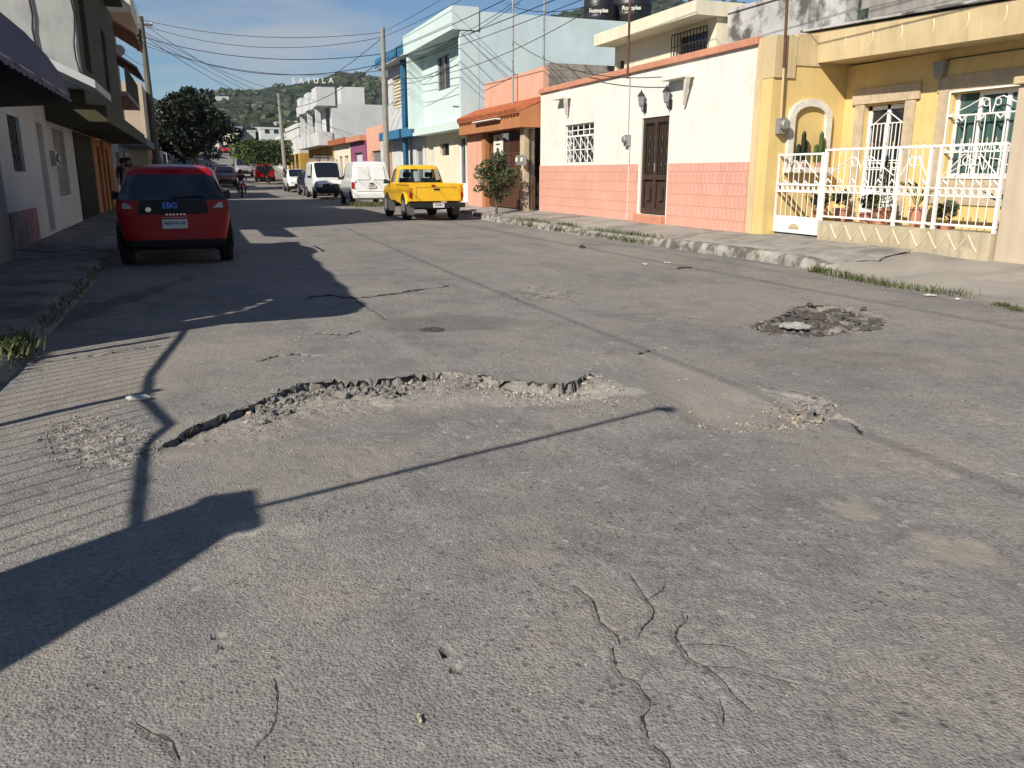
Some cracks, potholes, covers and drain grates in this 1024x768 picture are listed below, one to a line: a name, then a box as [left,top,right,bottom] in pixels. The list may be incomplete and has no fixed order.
pothole [626,353,843,434]
pothole [155,372,639,456]
crack [535,572,801,768]
crack [304,285,450,320]
pothole [739,302,893,338]
crack [136,723,179,767]
crack [251,678,277,754]
